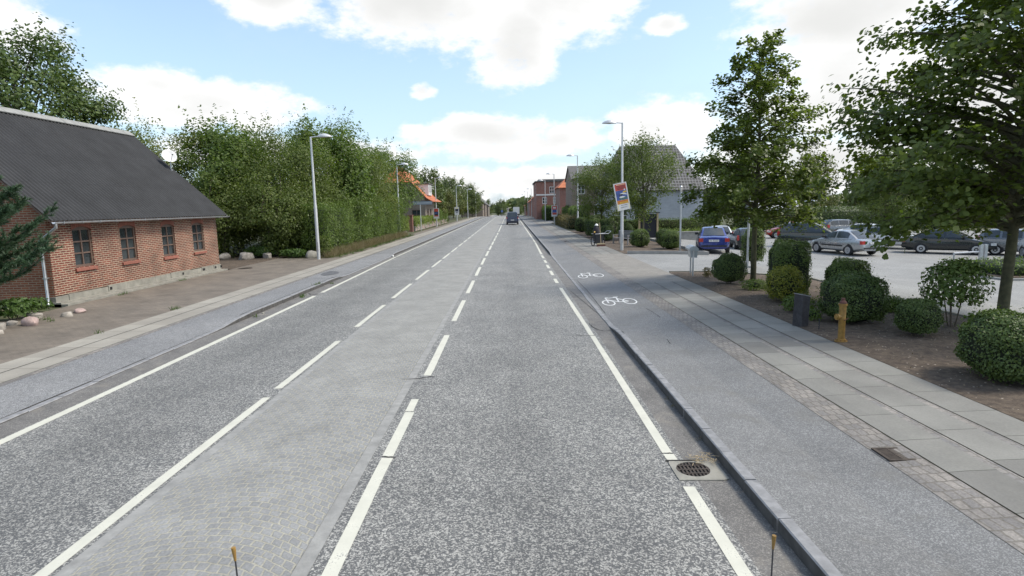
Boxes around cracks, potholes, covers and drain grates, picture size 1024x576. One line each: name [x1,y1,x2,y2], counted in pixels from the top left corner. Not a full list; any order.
drain grate [871,447,917,466]
drain grate [665,451,729,481]
